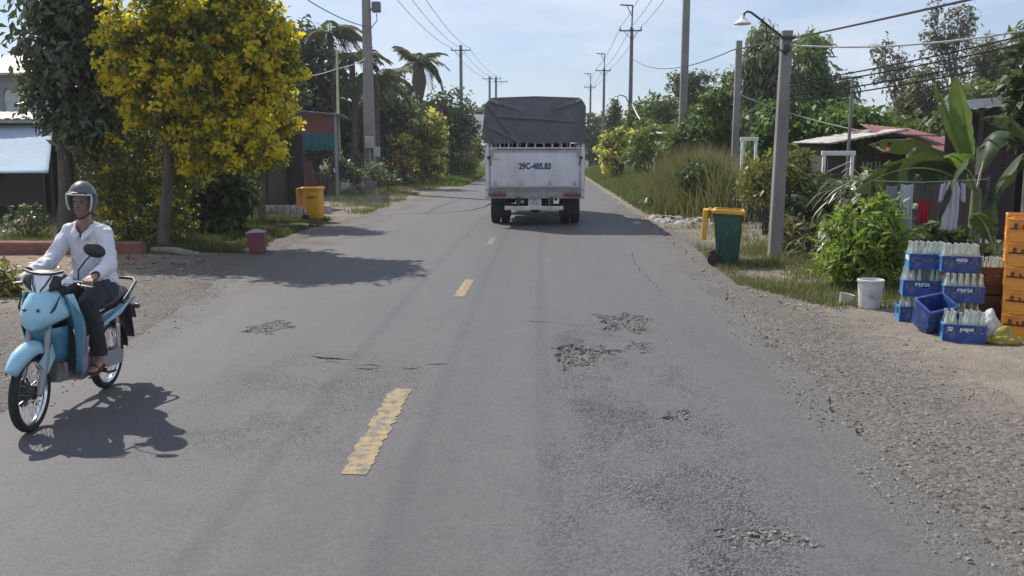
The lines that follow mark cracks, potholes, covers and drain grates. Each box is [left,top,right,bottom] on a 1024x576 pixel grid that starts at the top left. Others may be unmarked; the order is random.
crack [312,356,378,370]
pothole [239,320,297,335]
pothole [707,524,826,551]
pothole [591,312,656,335]
pothole [661,410,704,426]
pothole [623,340,657,355]
crack [632,253,673,301]
pothole [551,344,626,374]
